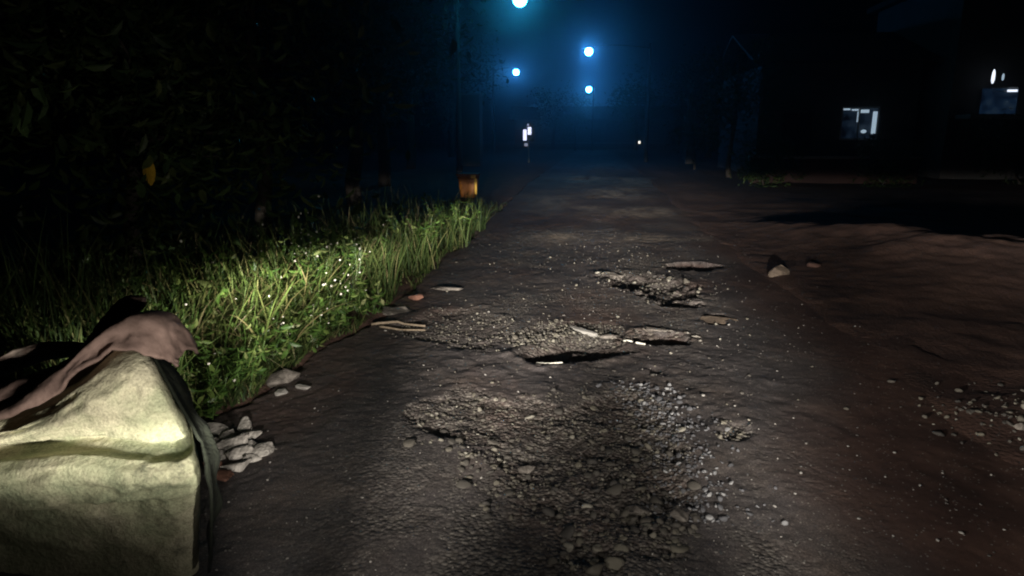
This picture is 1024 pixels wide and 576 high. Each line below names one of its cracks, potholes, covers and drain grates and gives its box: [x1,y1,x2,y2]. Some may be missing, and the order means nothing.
pothole [589,270,710,308]
pothole [628,330,696,346]
pothole [386,305,517,354]
pothole [397,384,709,575]
pothole [512,333,639,366]
pothole [659,261,731,272]
pothole [712,419,761,444]
